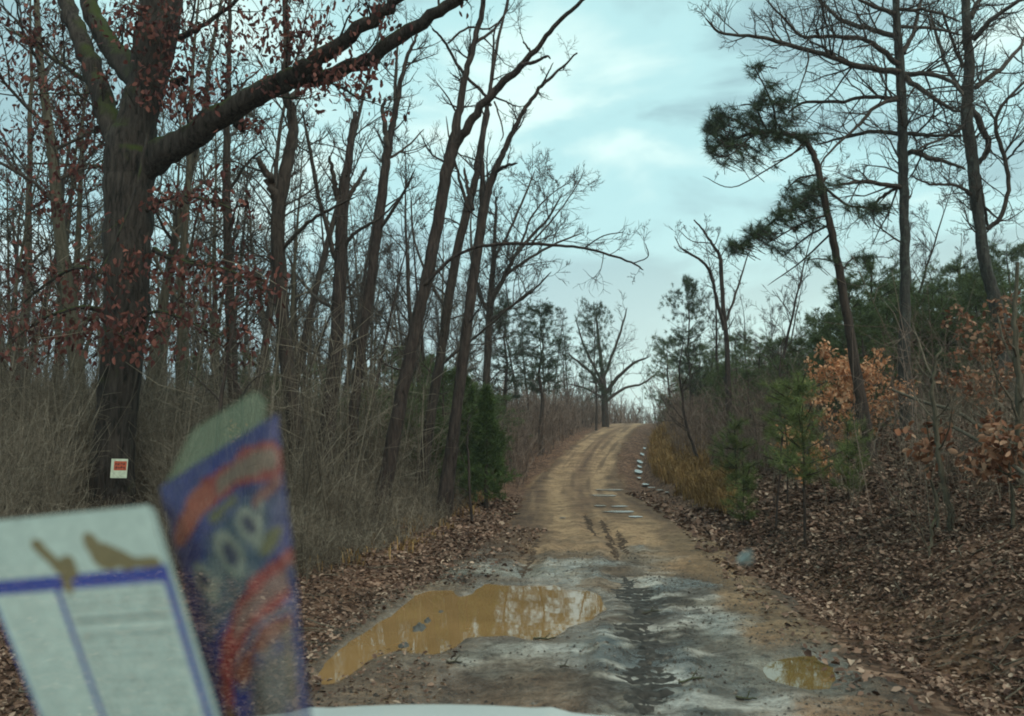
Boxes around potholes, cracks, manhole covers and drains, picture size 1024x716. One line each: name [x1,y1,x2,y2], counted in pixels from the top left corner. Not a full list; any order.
pothole [763,656,836,690]
pothole [318,584,606,684]
